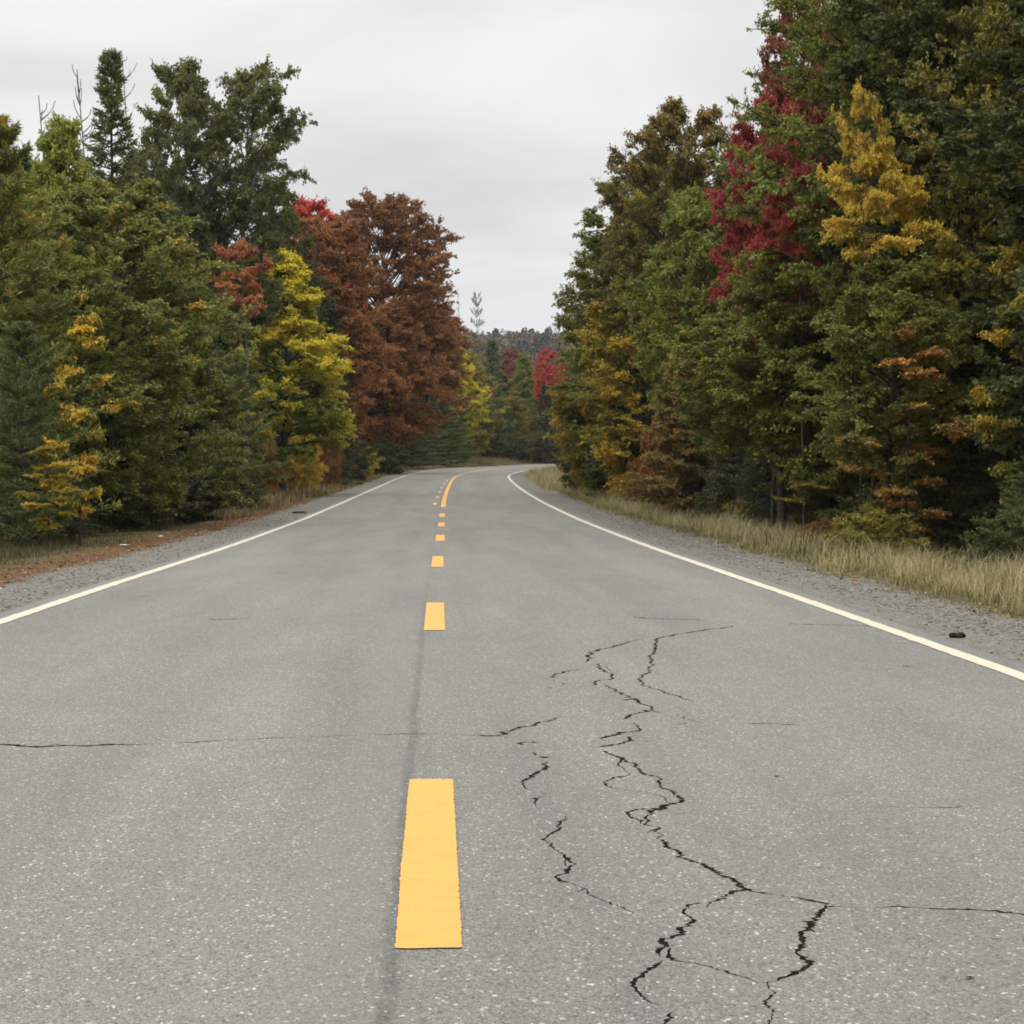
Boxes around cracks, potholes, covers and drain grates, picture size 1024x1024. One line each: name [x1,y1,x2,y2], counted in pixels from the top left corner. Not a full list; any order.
crack [584,626,1024,1024]
crack [0,717,633,913]
